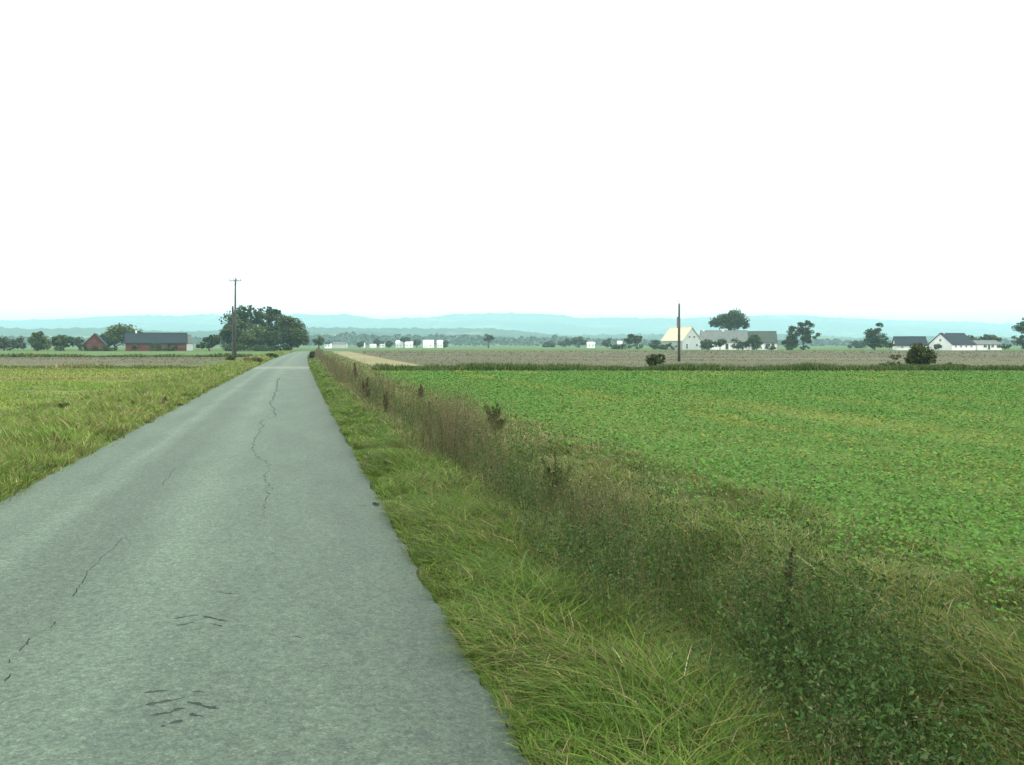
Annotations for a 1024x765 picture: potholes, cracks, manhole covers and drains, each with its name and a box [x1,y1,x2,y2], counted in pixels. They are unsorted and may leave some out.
crack [4,469,175,682]
crack [144,690,217,727]
crack [174,615,226,630]
crack [250,379,280,515]
